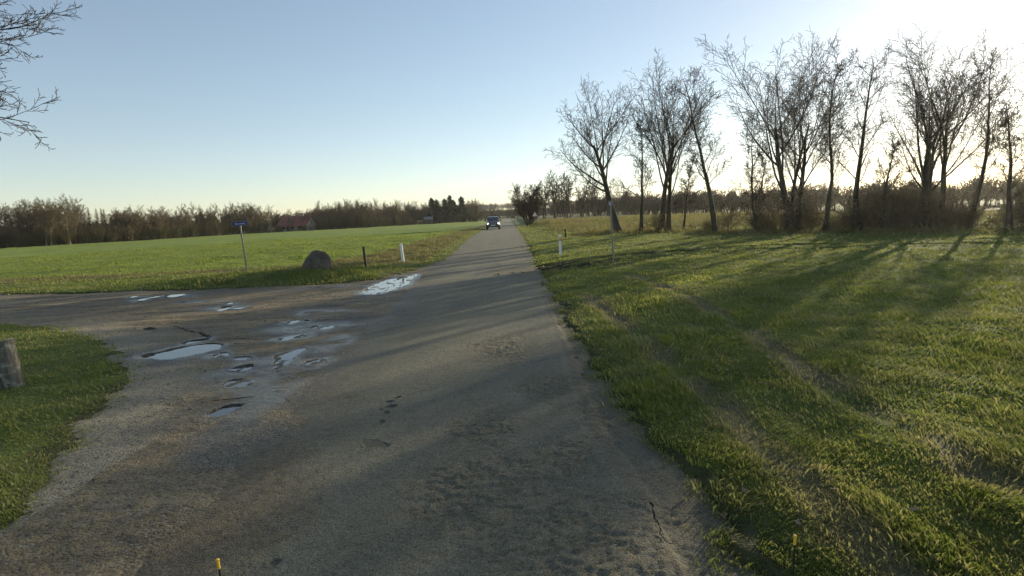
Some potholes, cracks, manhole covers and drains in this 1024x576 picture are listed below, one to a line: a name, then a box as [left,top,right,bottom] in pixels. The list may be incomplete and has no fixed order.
pothole [218,377,259,389]
pothole [137,342,227,361]
pothole [299,357,331,366]
pothole [226,363,258,372]
pothole [177,337,213,345]
pothole [357,274,419,295]
crack [169,326,265,341]
pothole [201,402,249,419]
pothole [268,347,310,371]
